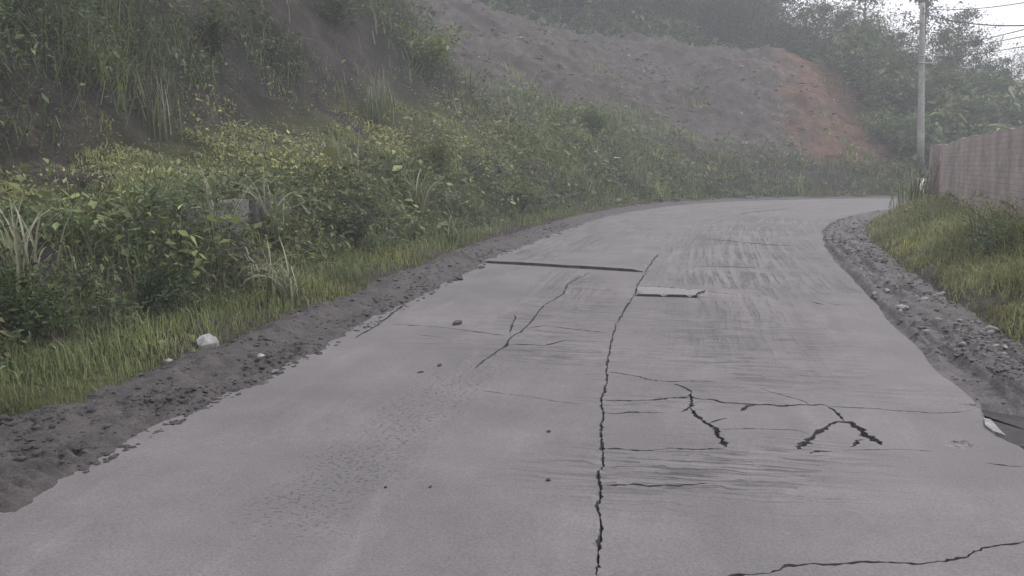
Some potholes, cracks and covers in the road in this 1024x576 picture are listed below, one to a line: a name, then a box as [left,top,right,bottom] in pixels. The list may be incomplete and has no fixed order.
crack [354,273,610,369]
crack [598,372,971,454]
crack [728,541,1024,576]
